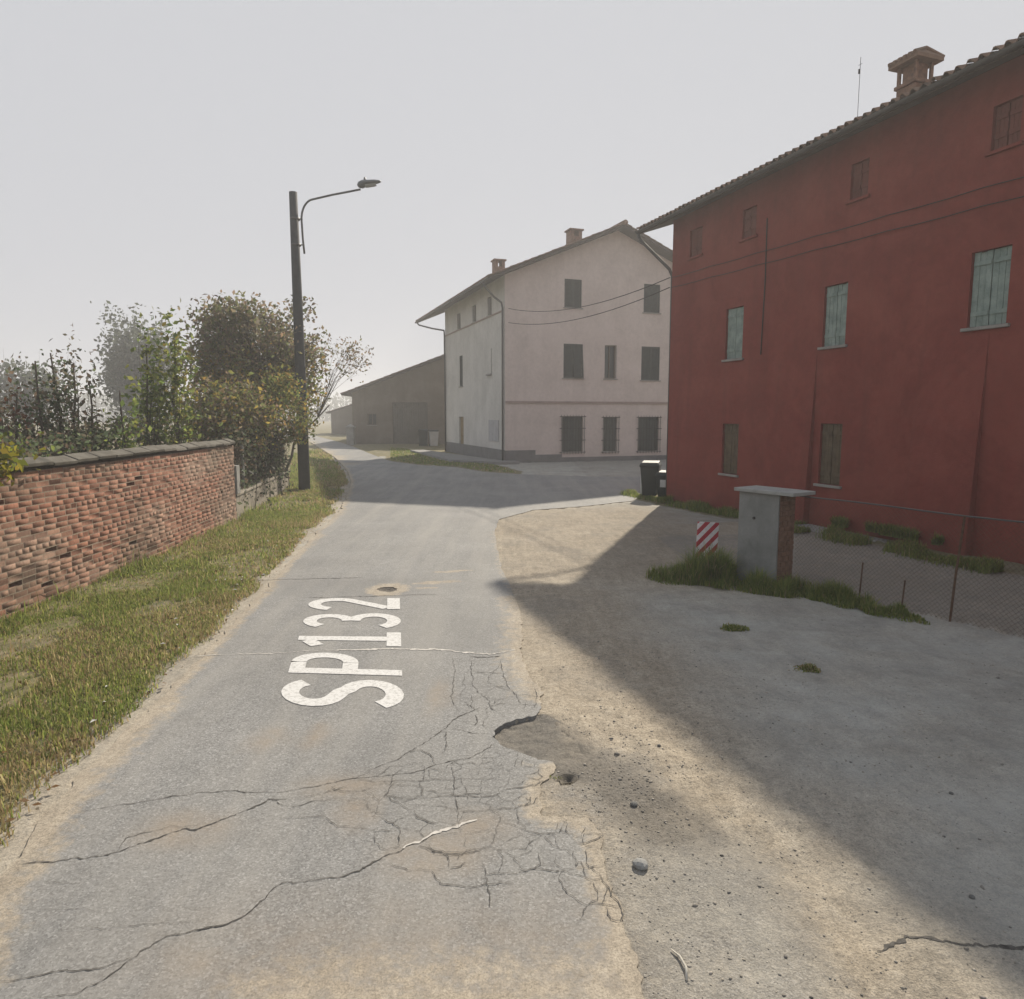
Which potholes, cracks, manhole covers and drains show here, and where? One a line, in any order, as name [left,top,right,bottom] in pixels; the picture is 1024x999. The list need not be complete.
crack [2,834,433,997]
crack [4,660,624,921]
pothole [495,714,595,767]
pothole [557,774,576,784]
crack [878,935,1024,951]
